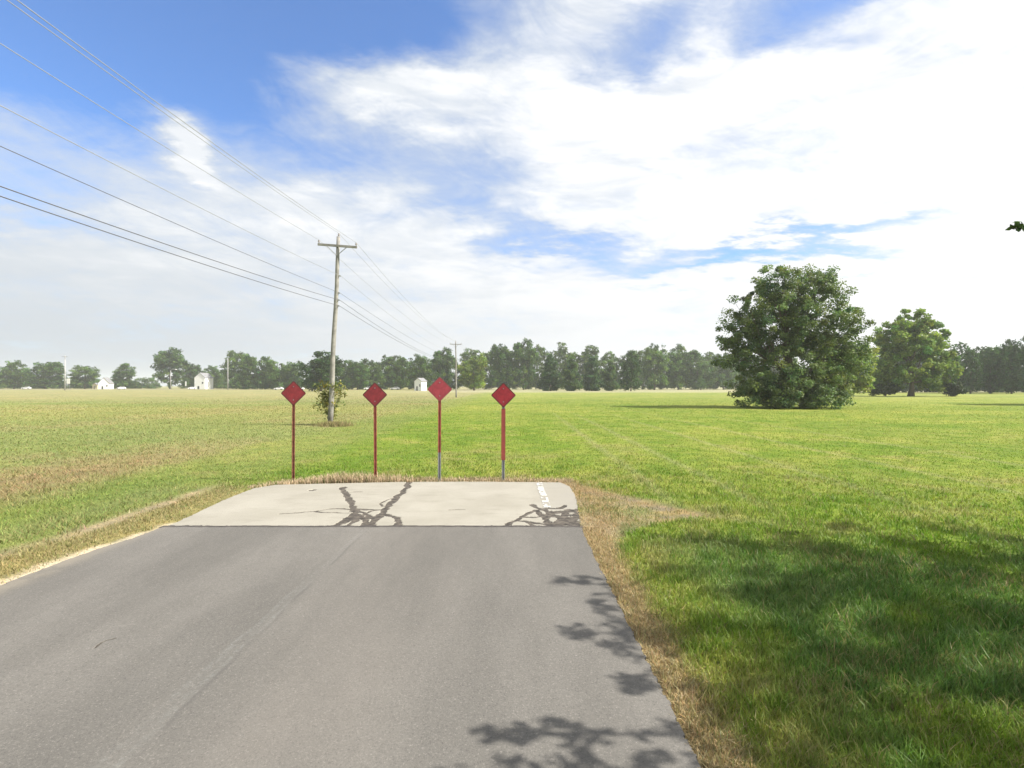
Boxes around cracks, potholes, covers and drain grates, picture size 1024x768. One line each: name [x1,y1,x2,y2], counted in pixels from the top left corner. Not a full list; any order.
crack [286,482,412,526]
crack [505,504,580,526]
